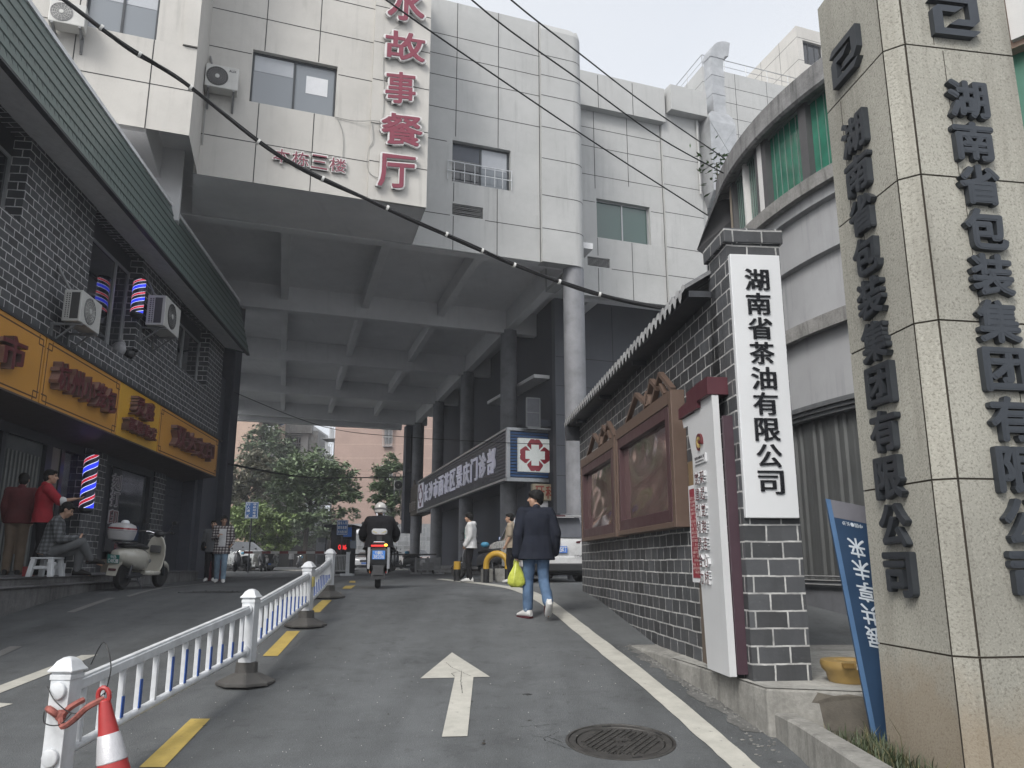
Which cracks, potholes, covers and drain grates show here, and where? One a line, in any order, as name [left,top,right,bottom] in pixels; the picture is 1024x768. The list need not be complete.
manhole cover [565,724,676,761]
